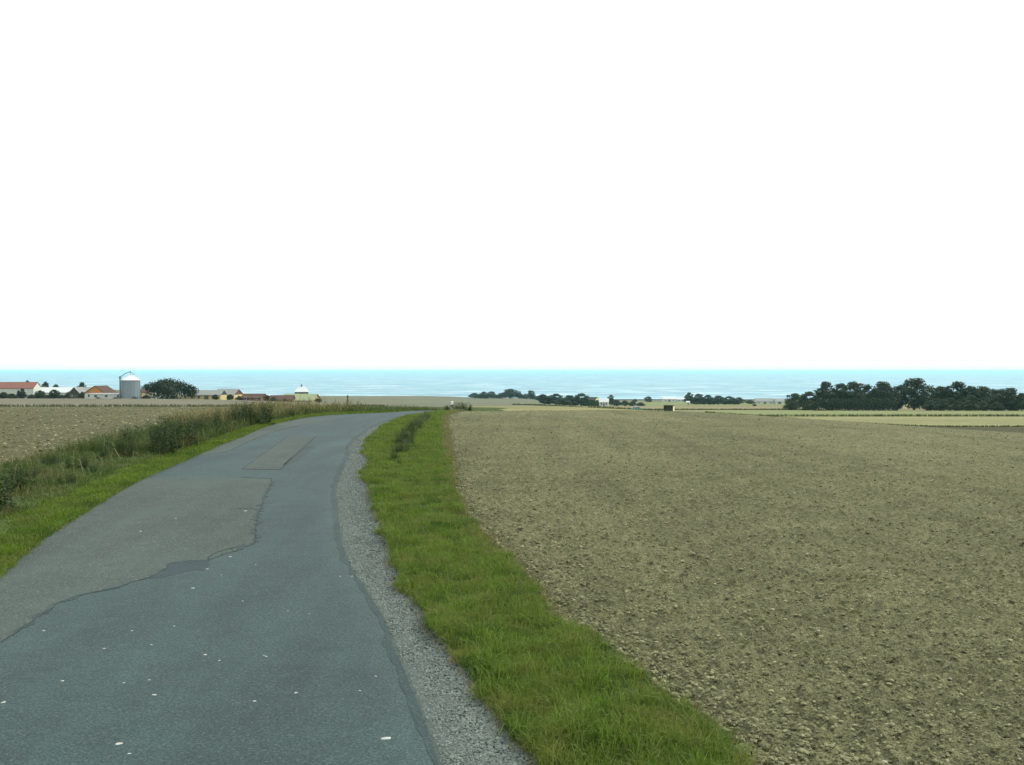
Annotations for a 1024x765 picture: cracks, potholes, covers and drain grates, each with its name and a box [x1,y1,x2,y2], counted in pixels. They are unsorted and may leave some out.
crack [0,477,275,642]
